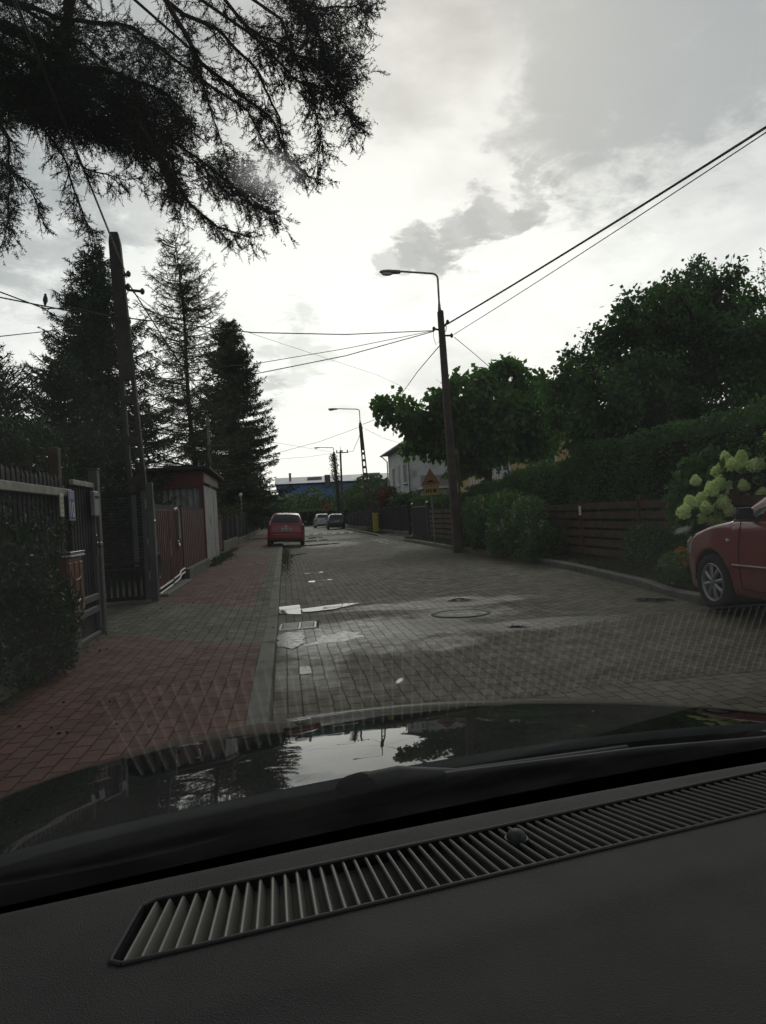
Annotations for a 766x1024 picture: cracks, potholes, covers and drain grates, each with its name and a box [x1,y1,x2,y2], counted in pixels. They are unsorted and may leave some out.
manhole cover [431,609,491,618]
drain grate [279,621,319,631]
